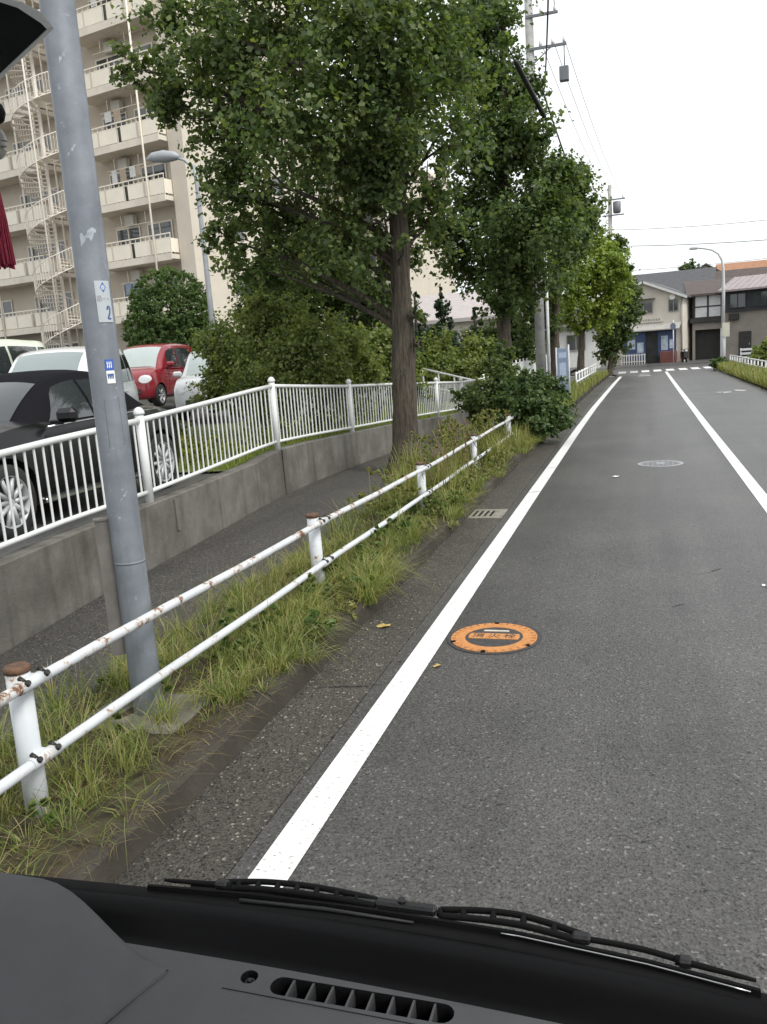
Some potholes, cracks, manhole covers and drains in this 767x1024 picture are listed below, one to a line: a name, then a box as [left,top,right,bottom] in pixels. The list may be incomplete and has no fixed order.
drain grate [468,509,508,518]
manhole cover [447,622,542,655]
